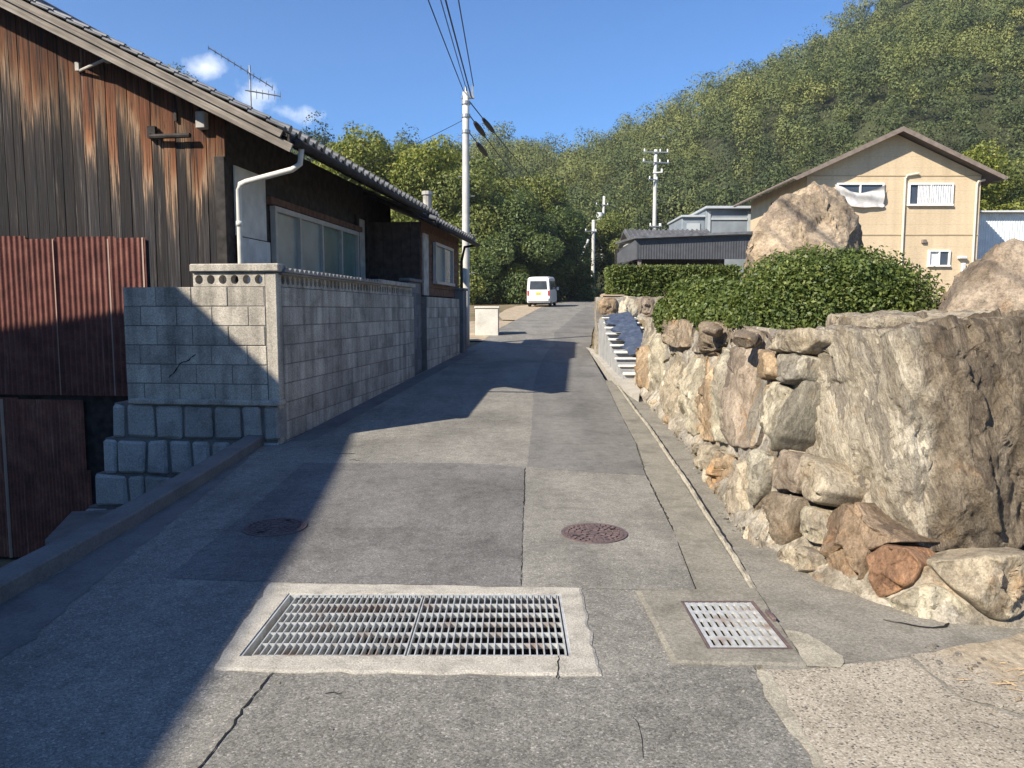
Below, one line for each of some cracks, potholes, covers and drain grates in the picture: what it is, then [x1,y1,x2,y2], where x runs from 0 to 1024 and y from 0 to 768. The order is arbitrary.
manhole cover [242,518,307,537]
drain grate [635,588,807,671]
drain grate [214,582,602,677]
manhole cover [561,523,628,544]
crack [197,672,274,768]
